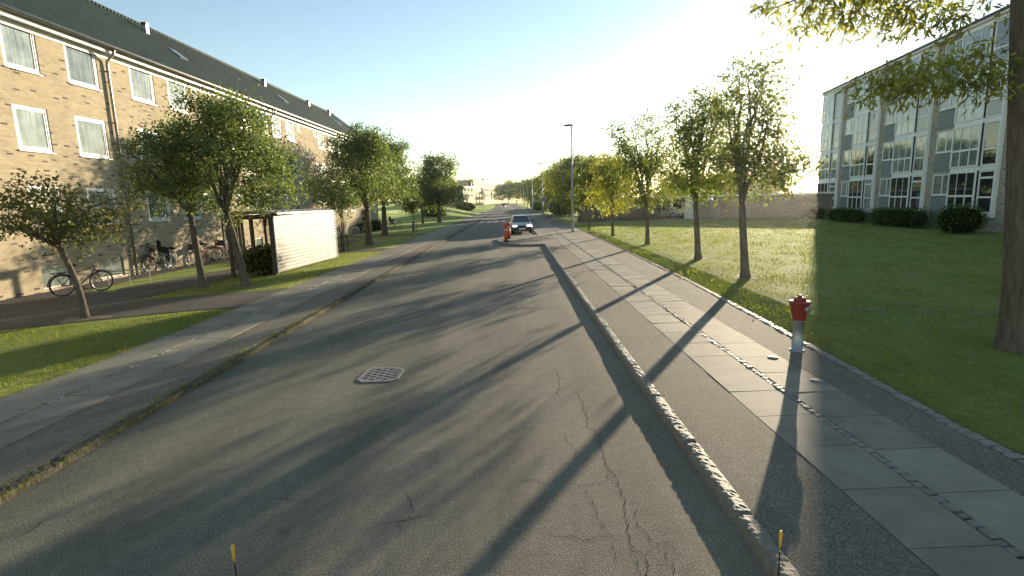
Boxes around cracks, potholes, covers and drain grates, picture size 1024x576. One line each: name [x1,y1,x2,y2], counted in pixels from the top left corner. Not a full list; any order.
crack [549,394,678,576]
